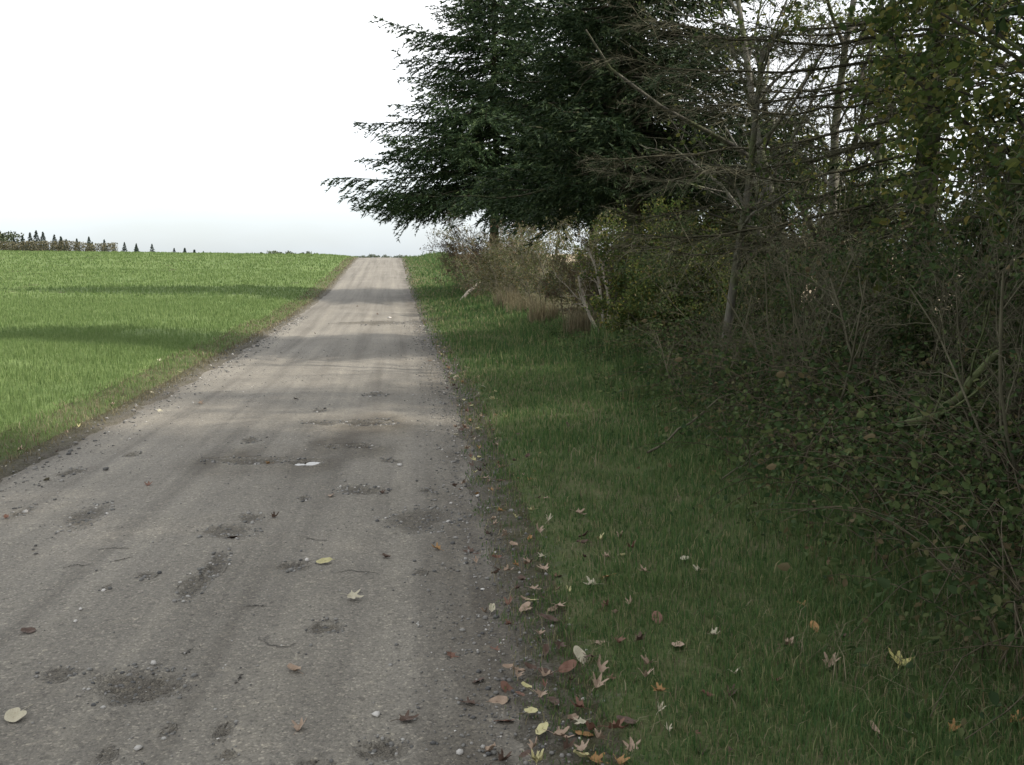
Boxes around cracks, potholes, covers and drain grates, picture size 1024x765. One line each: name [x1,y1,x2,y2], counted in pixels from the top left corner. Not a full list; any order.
pothole [200,454,304,465]
pothole [172,570,217,603]
pothole [55,500,115,534]
pothole [94,745,119,765]
pothole [275,558,316,573]
pothole [210,715,239,745]
pothole [196,524,264,540]
pothole [35,665,93,684]
pothole [79,663,198,709]
pothole [350,732,414,765]
pothole [331,483,392,495]
